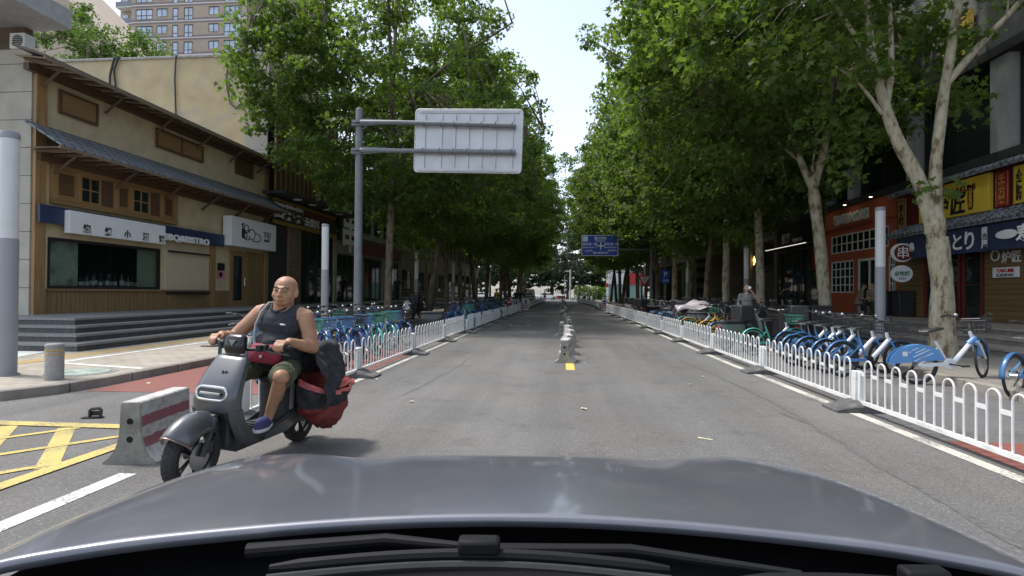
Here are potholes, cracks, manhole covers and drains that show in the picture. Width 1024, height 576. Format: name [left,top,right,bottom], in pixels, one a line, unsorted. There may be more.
manhole cover [42,368,119,377]
